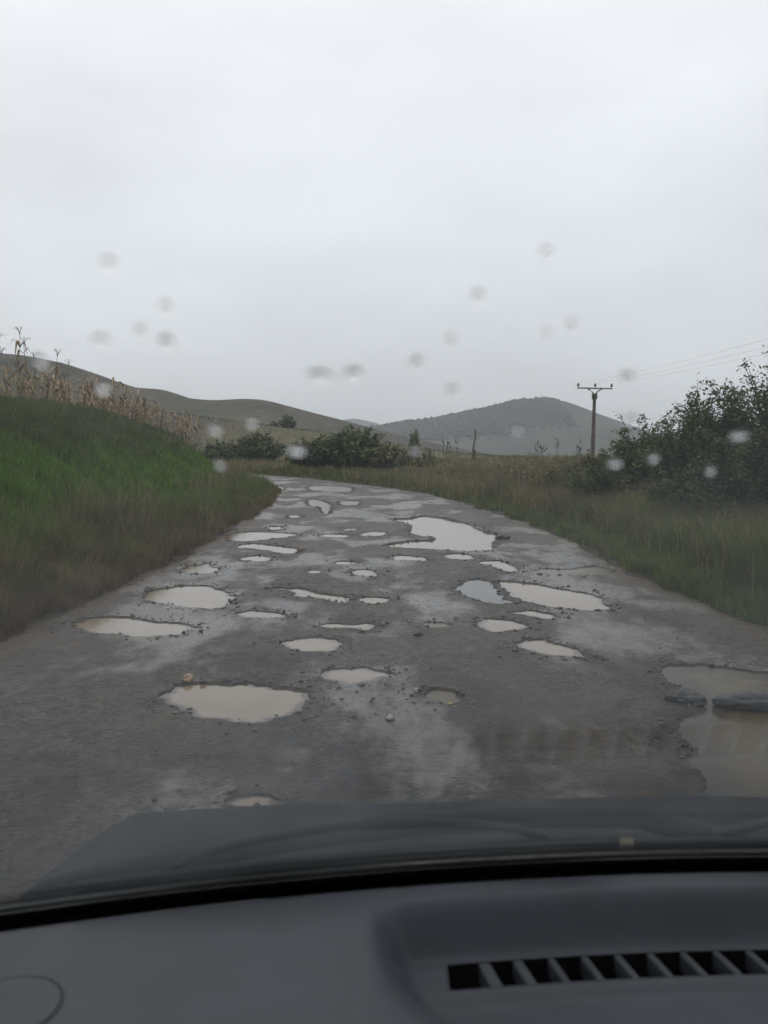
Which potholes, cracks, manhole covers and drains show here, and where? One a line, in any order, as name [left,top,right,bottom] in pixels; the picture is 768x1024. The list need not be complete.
pothole [269,586,352,603]
pothole [495,580,612,610]
pothole [67,615,195,637]
pothole [307,499,332,514]
pothole [320,666,399,685]
pothole [140,585,238,609]
pothole [318,622,376,630]
pothole [476,618,532,632]
pothole [223,531,297,541]
pothole [224,793,282,806]
pothole [451,578,514,604]
pothole [156,681,312,724]
